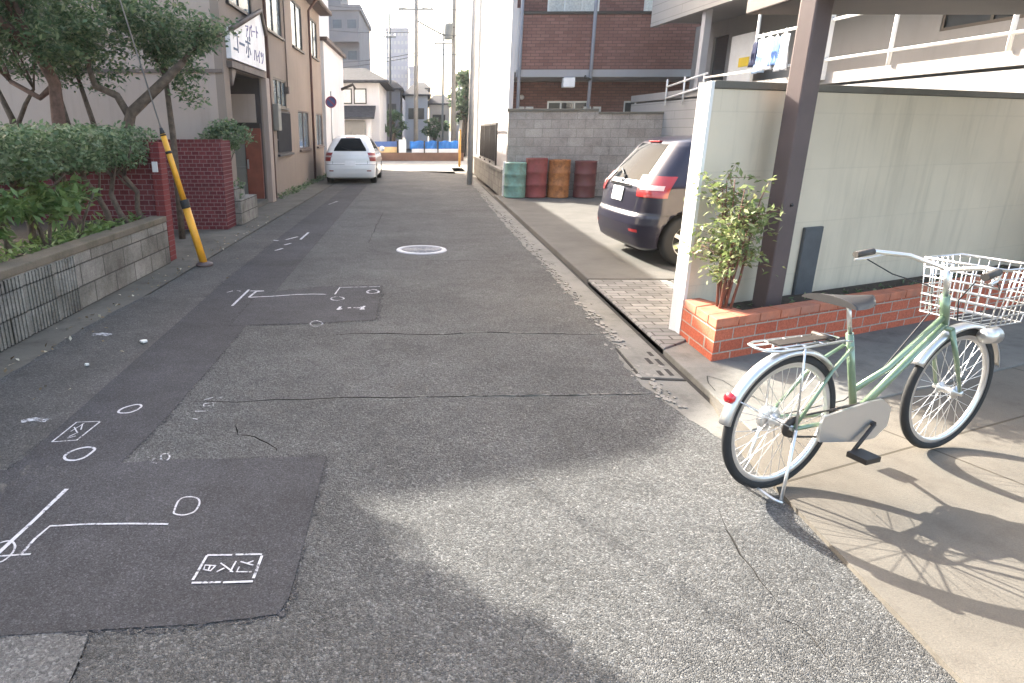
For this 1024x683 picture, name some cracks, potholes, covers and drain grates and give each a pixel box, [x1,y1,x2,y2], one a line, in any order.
manhole cover [396,245,447,255]
drain grate [615,348,686,381]
crack [718,508,841,674]
